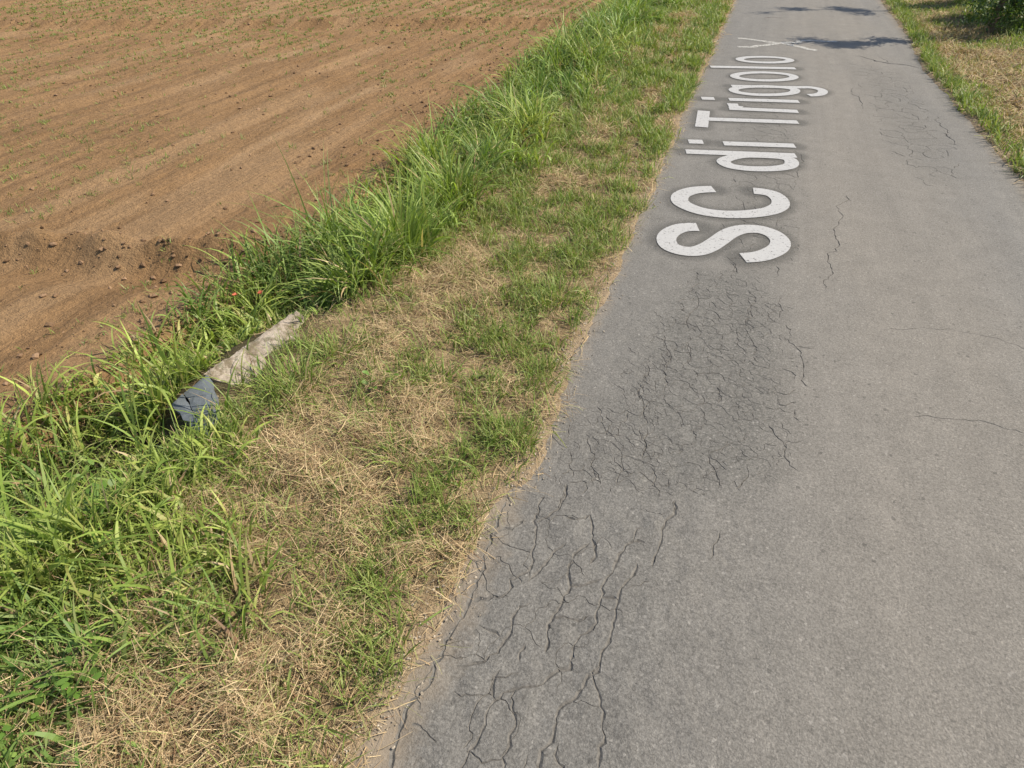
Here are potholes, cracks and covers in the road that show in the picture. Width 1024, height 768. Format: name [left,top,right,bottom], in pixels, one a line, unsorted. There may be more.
crack [851,56,960,186]
crack [915,415,1022,433]
crack [823,195,850,290]
